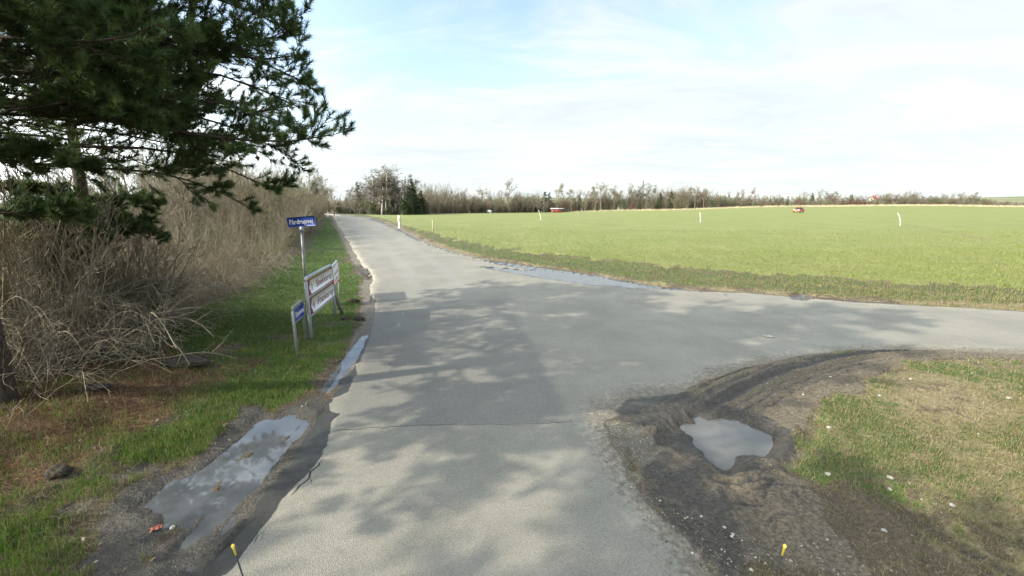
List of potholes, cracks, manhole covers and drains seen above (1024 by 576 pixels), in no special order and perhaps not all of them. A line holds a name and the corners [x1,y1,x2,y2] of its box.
pothole [673,406,792,471]
crack [294,460,322,492]
